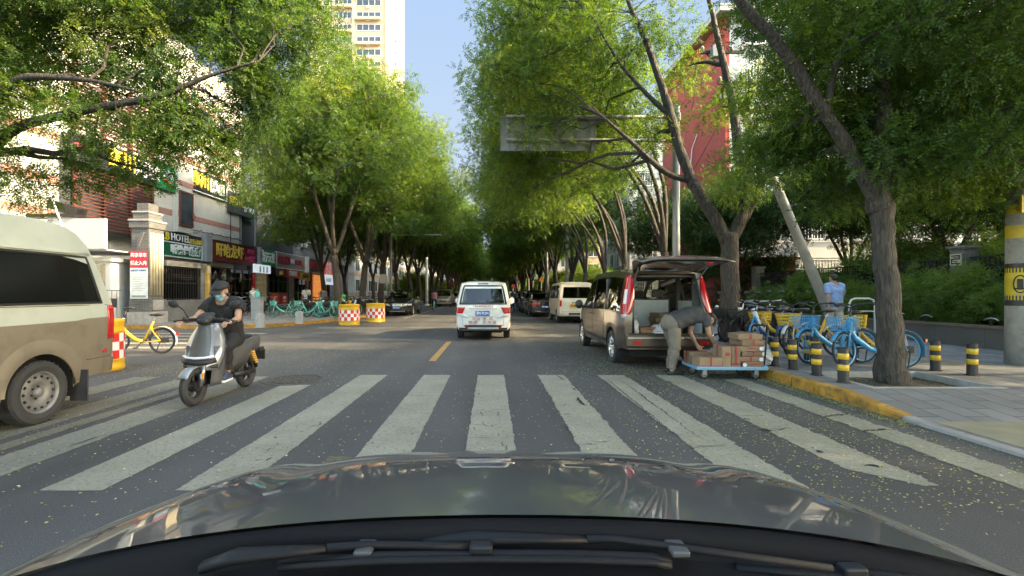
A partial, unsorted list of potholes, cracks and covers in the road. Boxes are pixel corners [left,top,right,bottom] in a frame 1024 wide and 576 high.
manhole cover [259,374,331,386]
crack [468,409,507,450]
crack [558,376,607,445]
